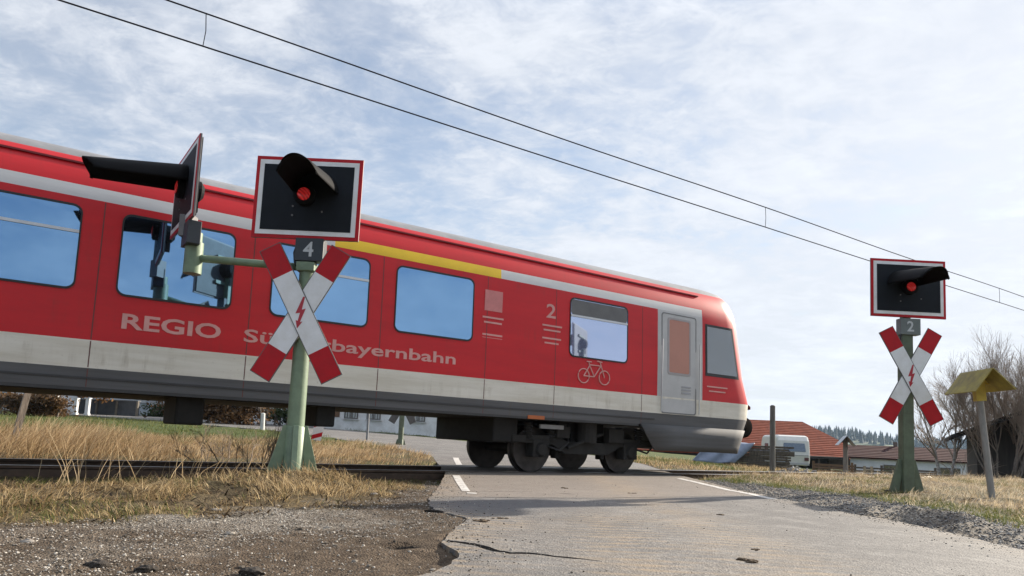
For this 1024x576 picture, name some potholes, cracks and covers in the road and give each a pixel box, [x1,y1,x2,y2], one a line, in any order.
crack [447,540,595,561]
